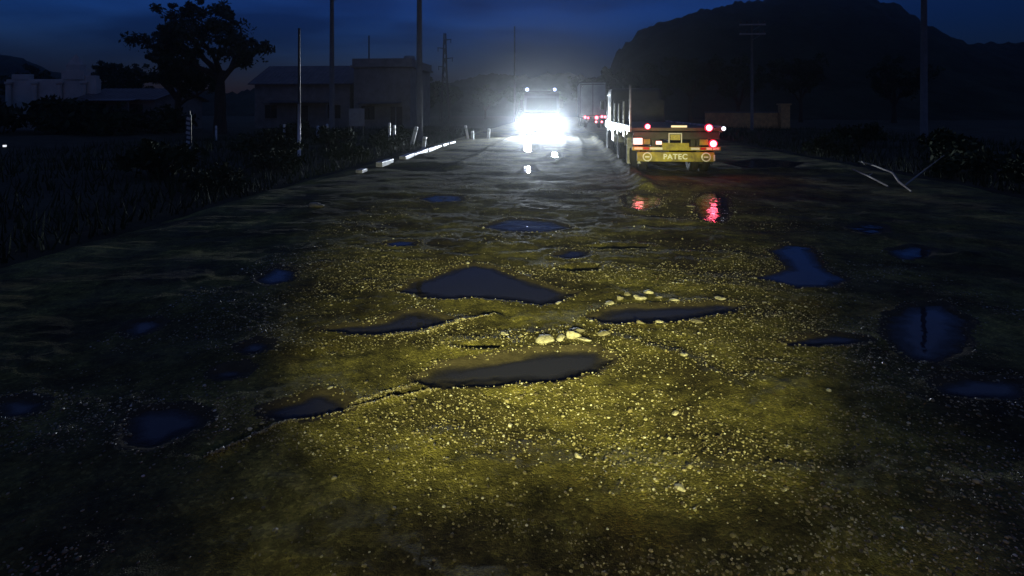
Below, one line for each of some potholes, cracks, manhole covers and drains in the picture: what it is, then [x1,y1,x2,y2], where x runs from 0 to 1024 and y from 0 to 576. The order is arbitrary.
pothole [583,299,754,325]
pothole [390,262,580,307]
pothole [547,248,594,259]
pothole [111,401,221,453]
pothole [477,217,575,233]
pothole [312,306,461,337]
pothole [250,263,301,287]
pothole [414,194,466,203]
crack [201,383,428,457]
pothole [923,371,1024,402]
pothole [253,386,358,424]
pothole [745,242,852,289]
